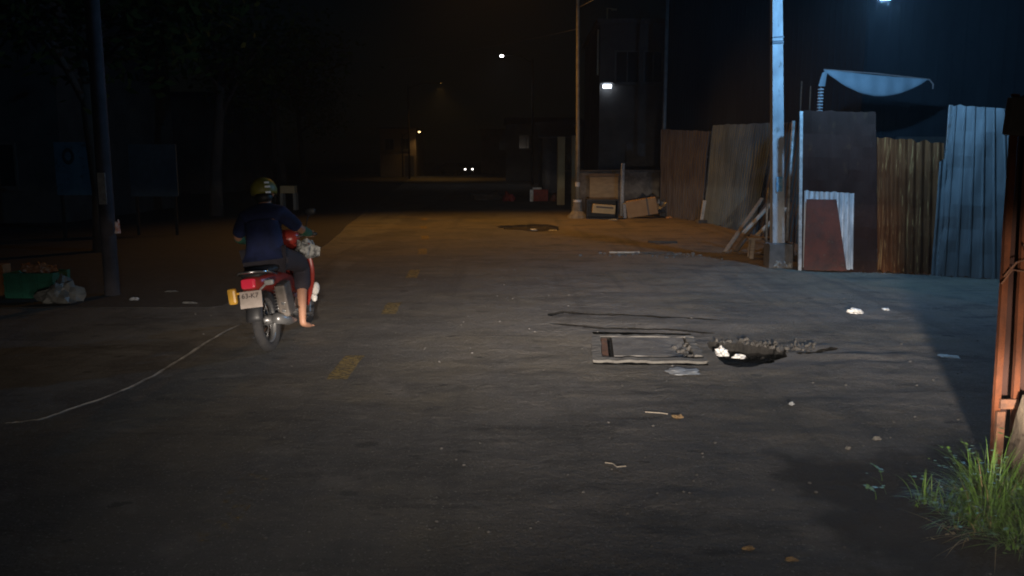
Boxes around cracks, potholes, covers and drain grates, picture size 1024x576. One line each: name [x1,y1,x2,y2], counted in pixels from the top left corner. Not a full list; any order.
manhole cover [591,334,708,366]
crack [547,311,718,335]
pothole [707,341,787,367]
